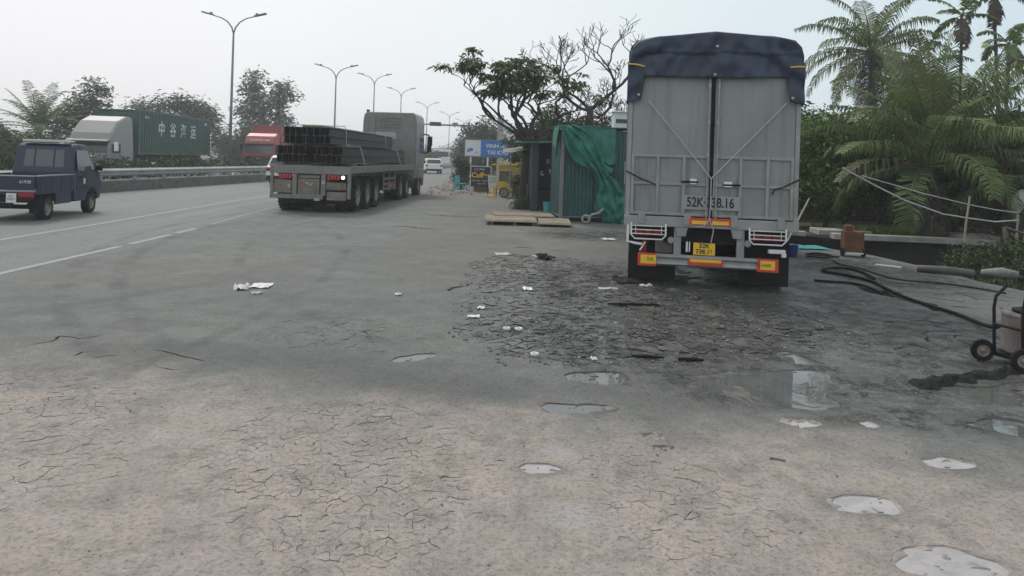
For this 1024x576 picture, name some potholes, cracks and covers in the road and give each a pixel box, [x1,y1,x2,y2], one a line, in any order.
pothole [921,455,977,469]
crack [184,400,505,576]
pothole [685,370,844,411]
pothole [890,545,1012,576]
crack [452,254,839,366]
crack [25,335,115,358]
crack [154,349,203,370]
pothole [564,371,631,384]
pothole [826,494,904,515]
crack [579,454,794,563]
crack [256,316,426,350]
